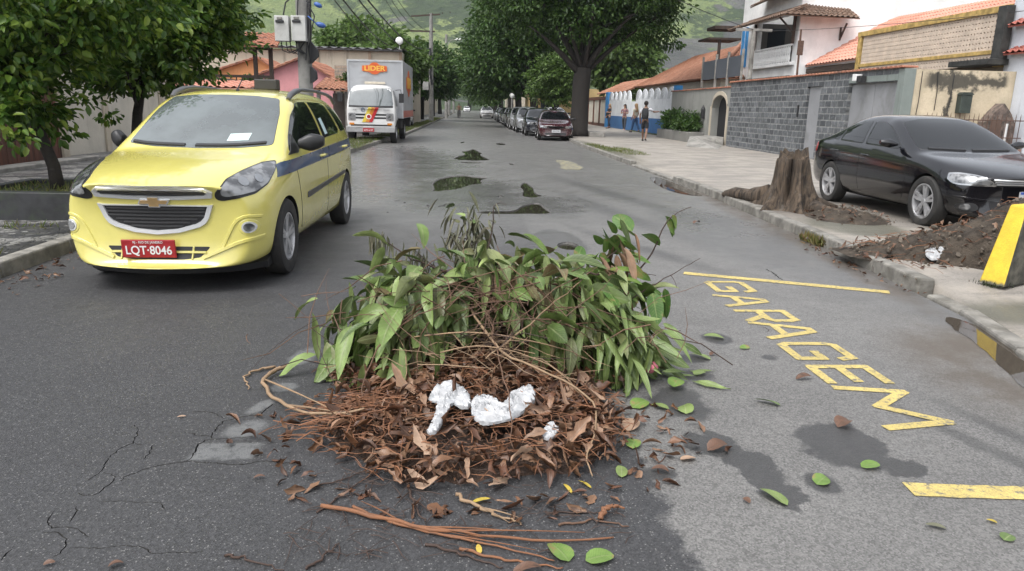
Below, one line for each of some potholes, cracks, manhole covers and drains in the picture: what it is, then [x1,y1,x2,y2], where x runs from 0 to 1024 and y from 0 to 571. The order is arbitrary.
pothole [477,203,551,214]
crack [45,405,304,557]
pothole [557,242,579,250]
pothole [520,182,542,198]
pothole [454,149,490,161]
pothole [432,175,488,192]
